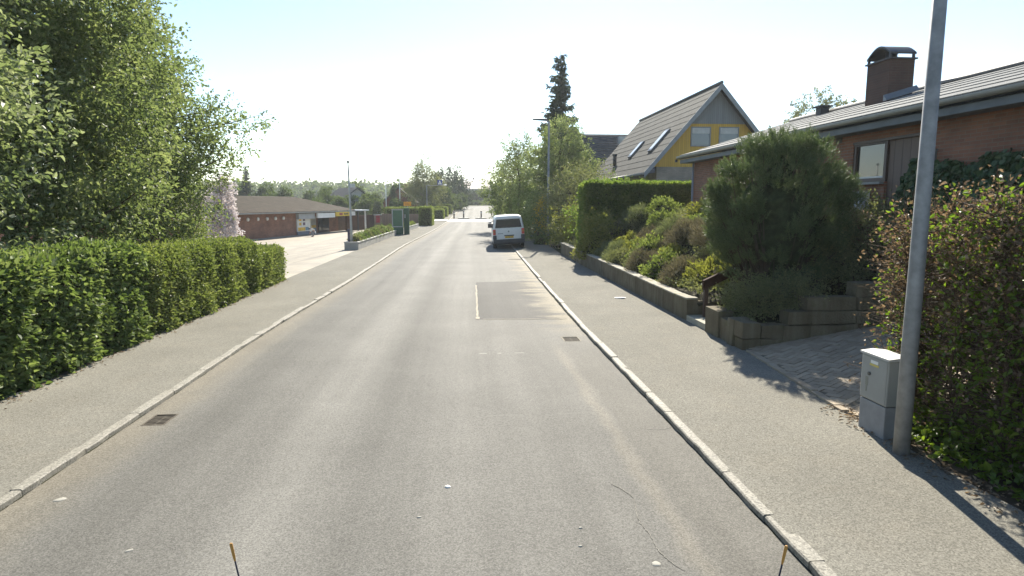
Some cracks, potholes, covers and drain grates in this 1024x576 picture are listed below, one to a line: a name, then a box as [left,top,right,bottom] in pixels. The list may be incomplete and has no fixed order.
drain grate [140,414,178,426]
crack [617,486,680,568]
